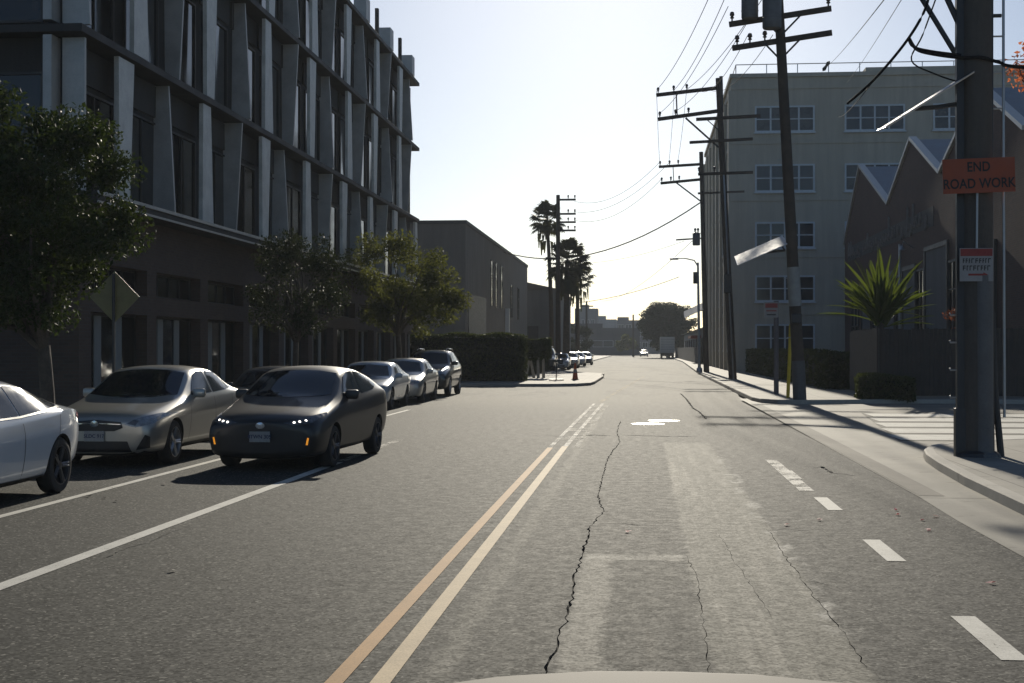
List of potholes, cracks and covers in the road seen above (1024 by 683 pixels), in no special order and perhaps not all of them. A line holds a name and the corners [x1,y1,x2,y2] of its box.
crack [688,560,710,673]
crack [544,422,696,674]
crack [770,529,867,668]
